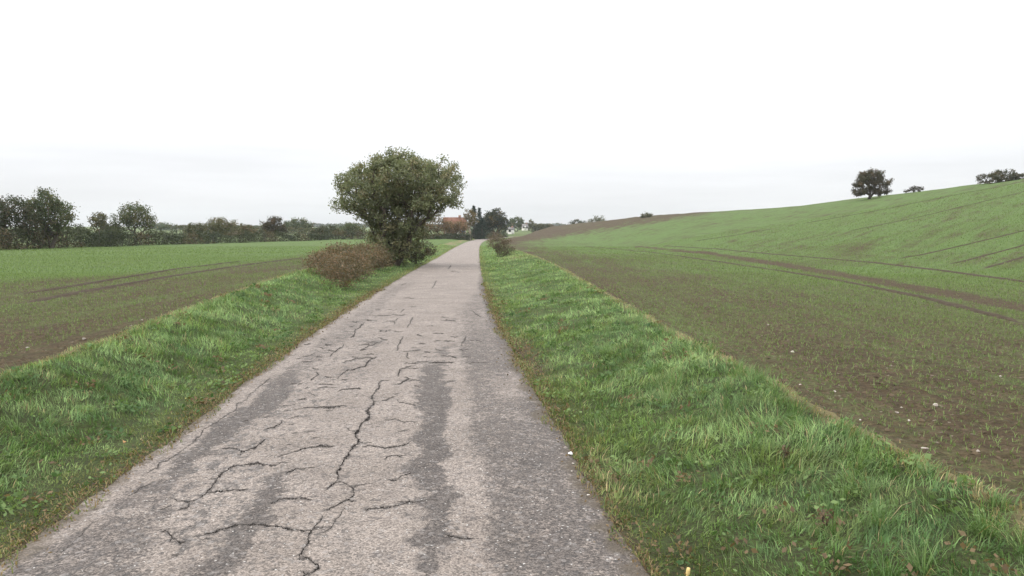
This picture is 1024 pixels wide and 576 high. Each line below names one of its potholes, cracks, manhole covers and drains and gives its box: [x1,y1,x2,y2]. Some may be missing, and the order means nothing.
crack [61,283,487,576]
